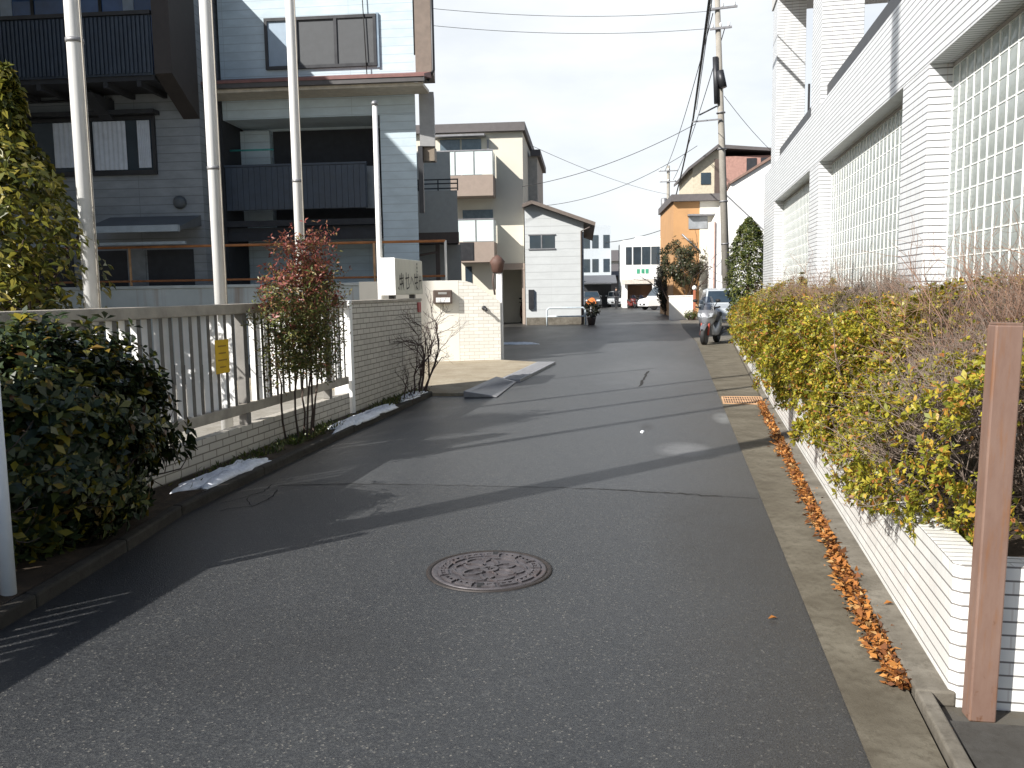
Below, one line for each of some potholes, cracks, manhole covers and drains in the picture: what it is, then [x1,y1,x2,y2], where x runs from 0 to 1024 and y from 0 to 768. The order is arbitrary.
drain grate [721,396,763,405]
manhole cover [426,550,552,592]
crack [221,484,278,511]
